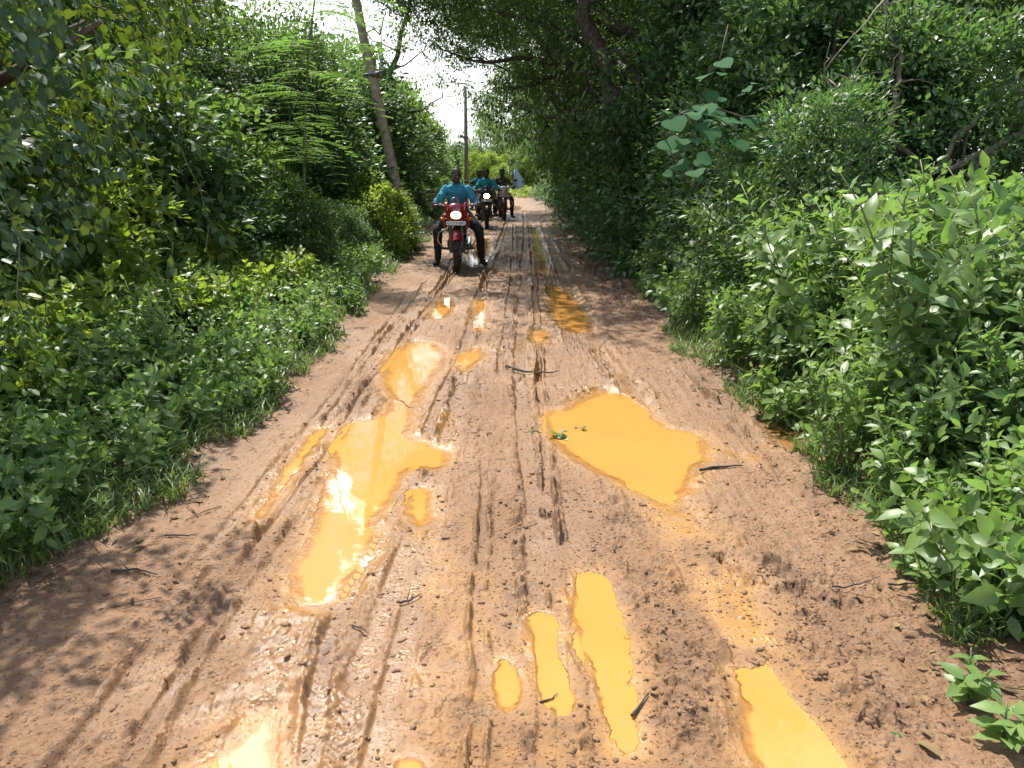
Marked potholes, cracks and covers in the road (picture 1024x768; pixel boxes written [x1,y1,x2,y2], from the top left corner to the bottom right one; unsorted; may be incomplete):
pothole [545,280,594,334]
pothole [513,601,588,726]
pothole [271,399,459,615]
pothole [719,656,863,768]
pothole [559,566,653,766]
pothole [172,697,301,768]
pothole [534,388,718,509]
pothole [373,339,452,408]
